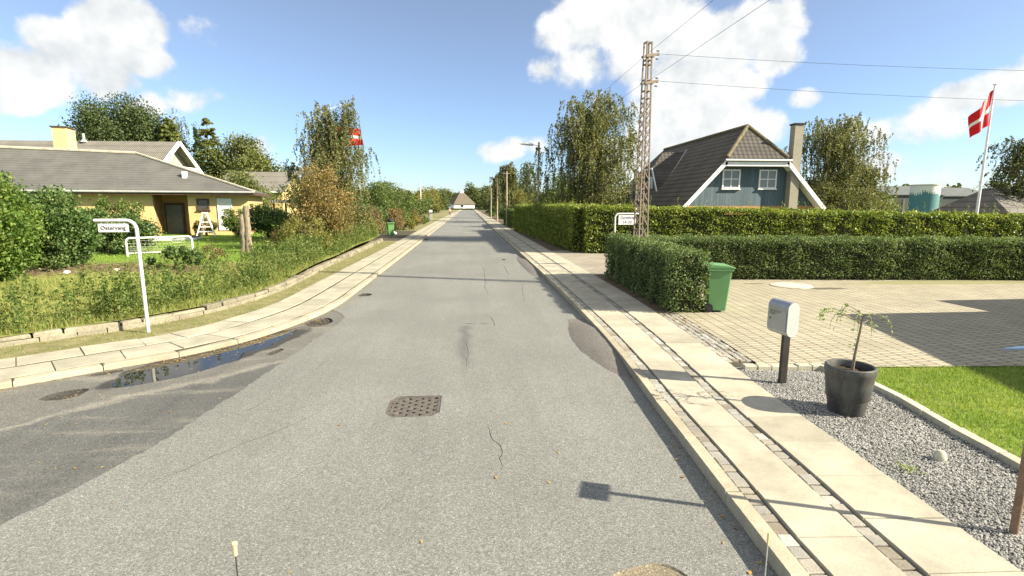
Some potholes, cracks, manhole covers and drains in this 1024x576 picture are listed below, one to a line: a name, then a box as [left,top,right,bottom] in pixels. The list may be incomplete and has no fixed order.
crack [133,416,311,488]
